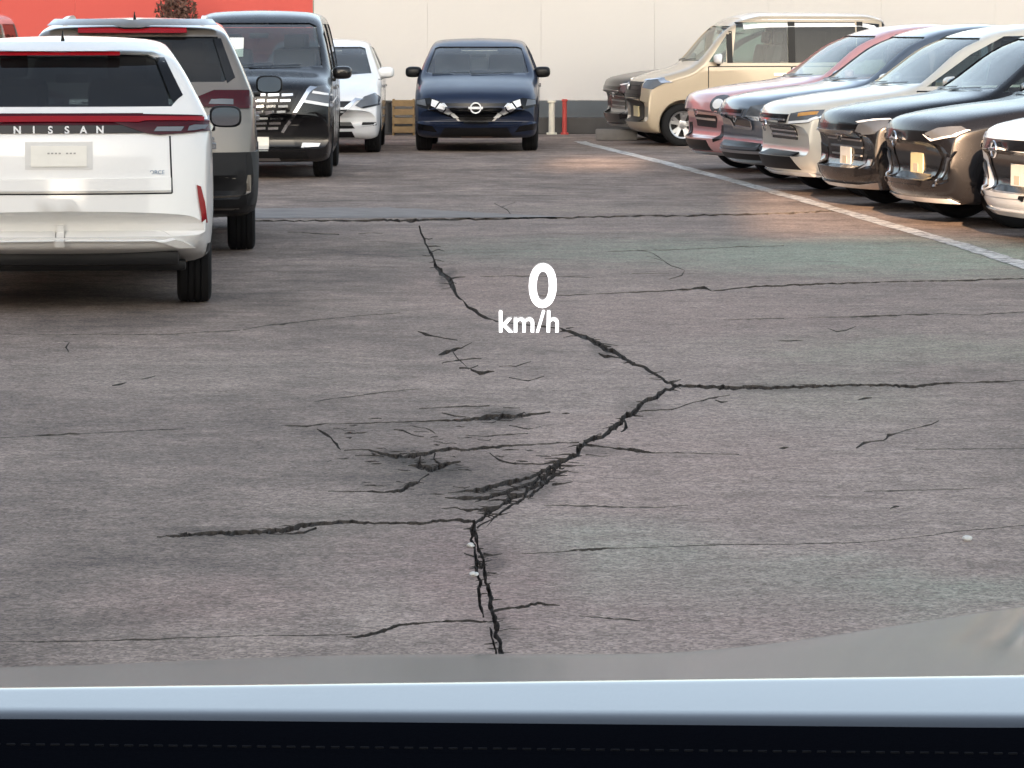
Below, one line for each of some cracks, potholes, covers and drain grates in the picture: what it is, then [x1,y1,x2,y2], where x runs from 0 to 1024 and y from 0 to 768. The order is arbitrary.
crack [0,226,1024,654]
